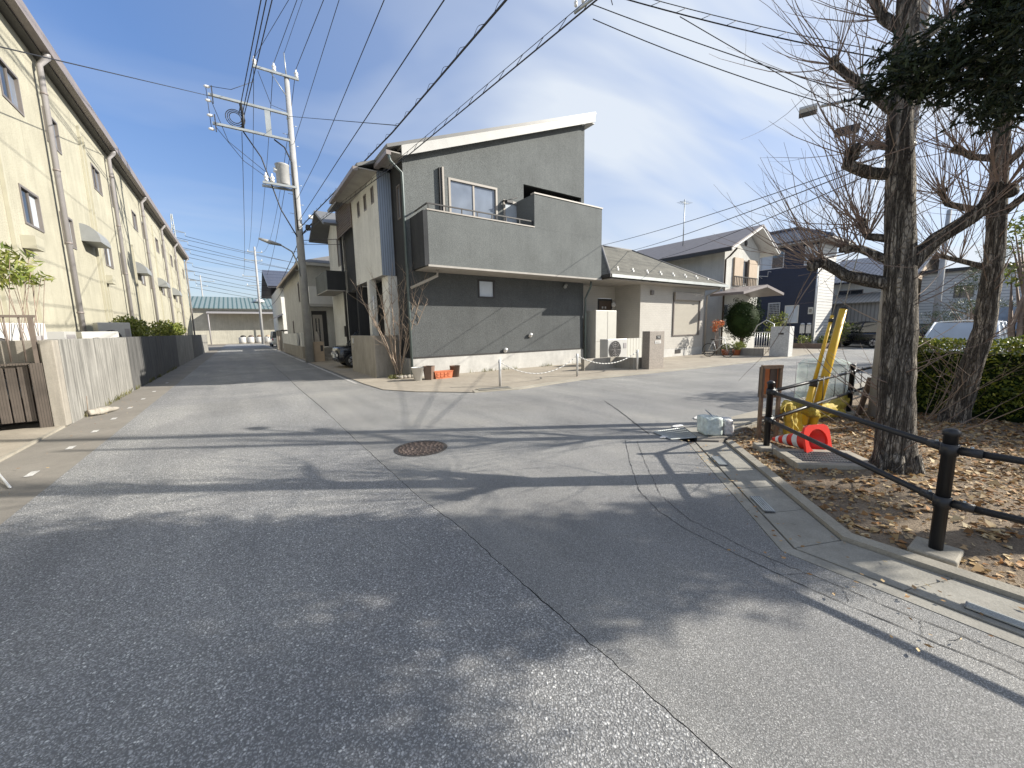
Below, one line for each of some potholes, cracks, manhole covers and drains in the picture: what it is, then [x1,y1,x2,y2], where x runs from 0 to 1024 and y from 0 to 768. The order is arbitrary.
drain grate [964,601,1024,630]
drain grate [750,496,776,513]
drain grate [654,427,697,440]
drain grate [773,448,876,470]
manhole cover [394,441,447,457]
